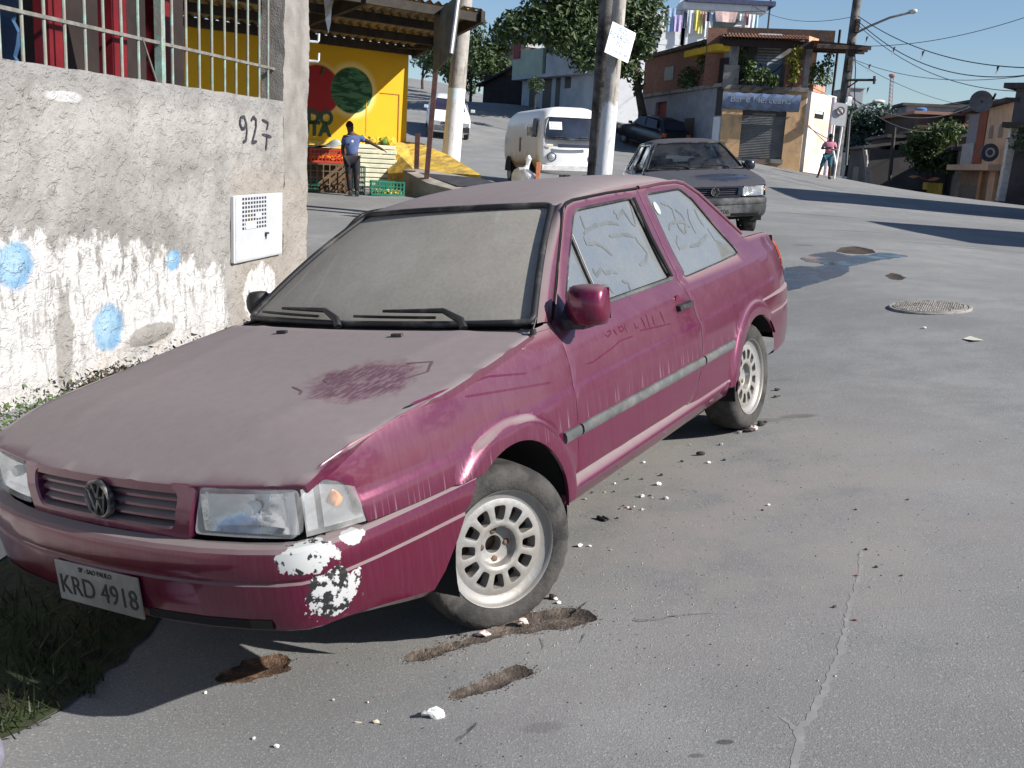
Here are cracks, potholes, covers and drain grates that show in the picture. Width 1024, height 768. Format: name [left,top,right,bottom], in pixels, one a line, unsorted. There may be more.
pothole [215,653,291,683]
pothole [836,246,876,254]
pothole [448,665,534,699]
crack [778,549,864,768]
pothole [404,608,597,662]
manhole cover [888,300,973,315]
crack [634,613,710,622]
